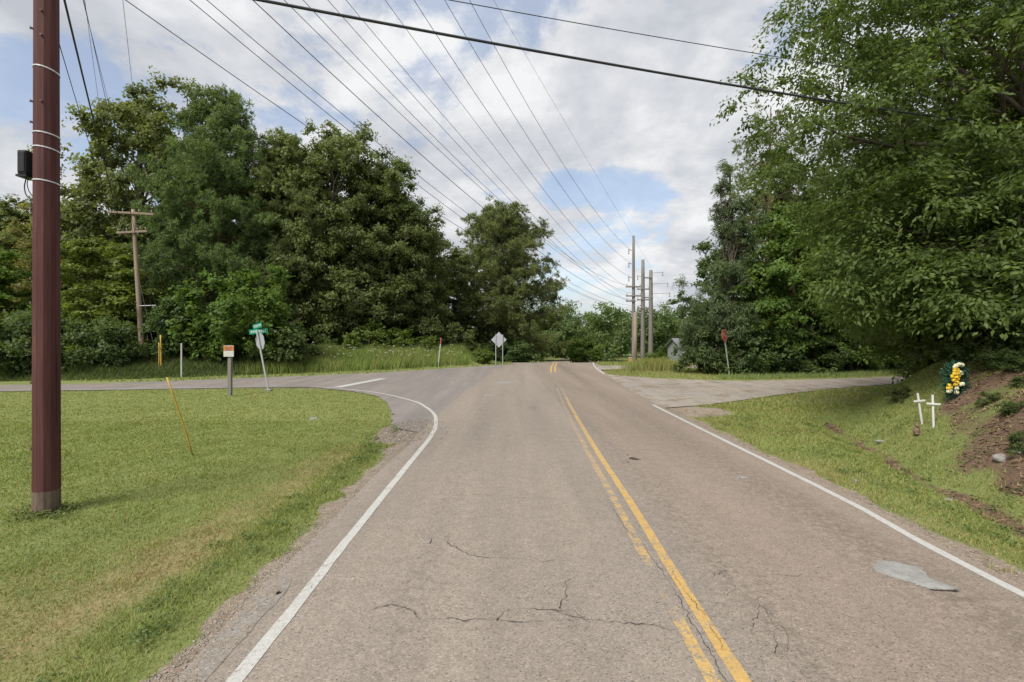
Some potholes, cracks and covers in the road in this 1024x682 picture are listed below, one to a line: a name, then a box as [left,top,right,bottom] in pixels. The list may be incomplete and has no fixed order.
crack [752,596,797,666]
crack [369,579,663,628]
crack [616,513,735,682]
